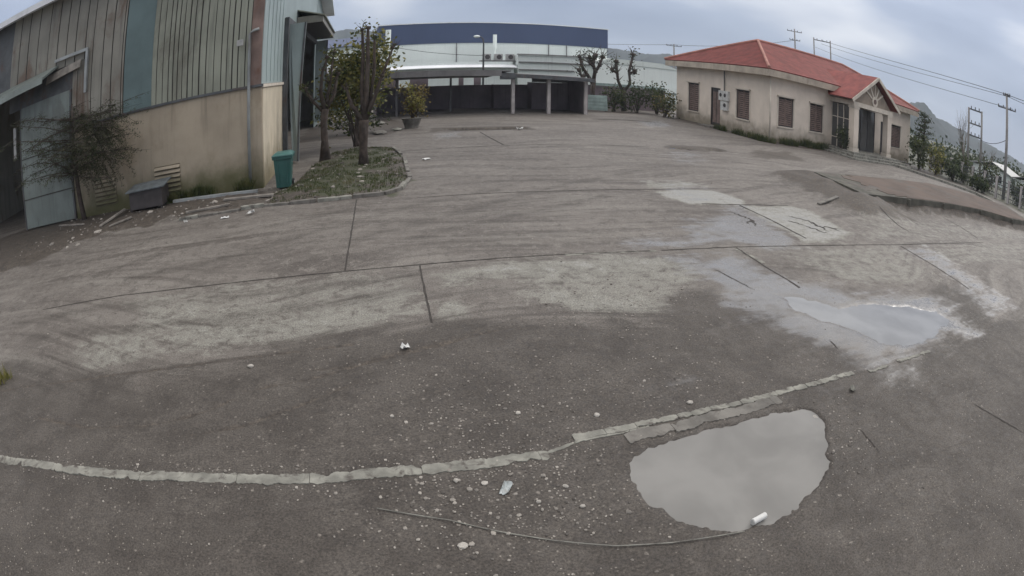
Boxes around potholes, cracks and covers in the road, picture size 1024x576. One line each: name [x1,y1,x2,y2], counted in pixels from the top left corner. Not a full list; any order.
pothole [615,404,838,539]
pothole [768,290,957,350]
crack [790,216,841,233]
